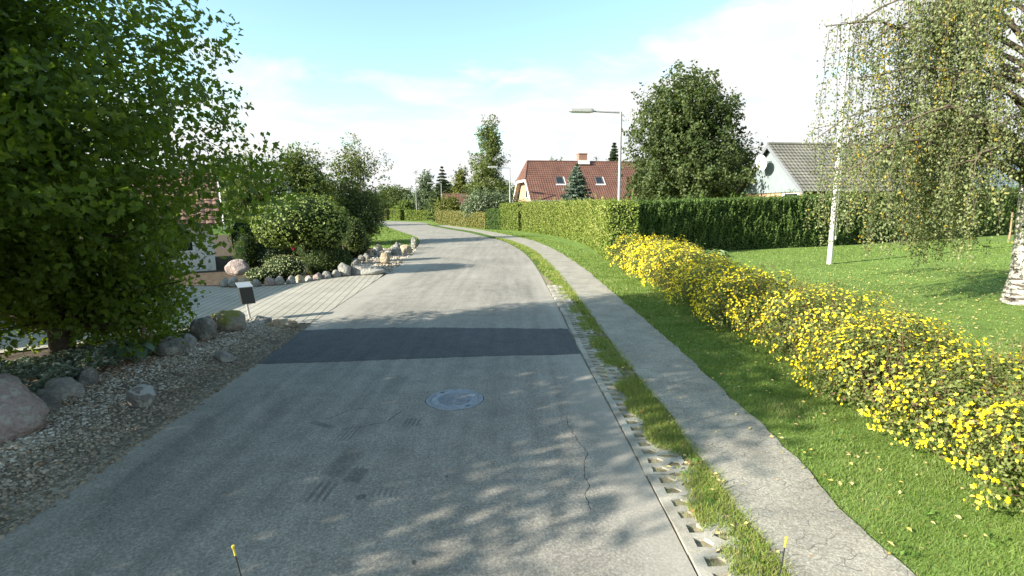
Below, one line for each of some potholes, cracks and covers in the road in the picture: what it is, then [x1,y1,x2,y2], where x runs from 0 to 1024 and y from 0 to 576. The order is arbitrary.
crack [567,419,591,511]
manhole cover [426,389,483,410]
